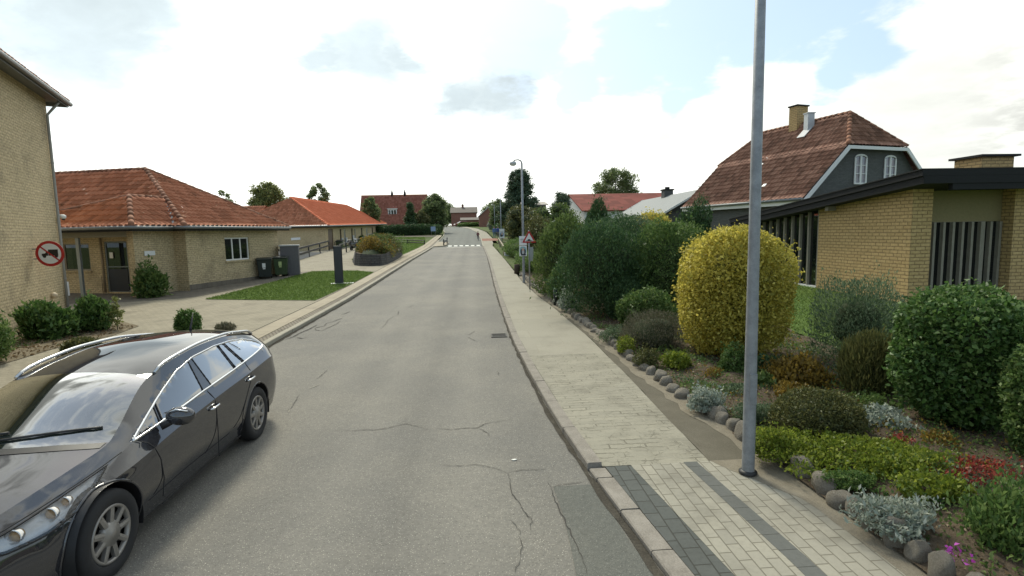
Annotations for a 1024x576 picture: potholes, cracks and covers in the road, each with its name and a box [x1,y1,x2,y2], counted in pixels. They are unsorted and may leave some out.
crack [443,464,545,571]
crack [288,312,348,339]
